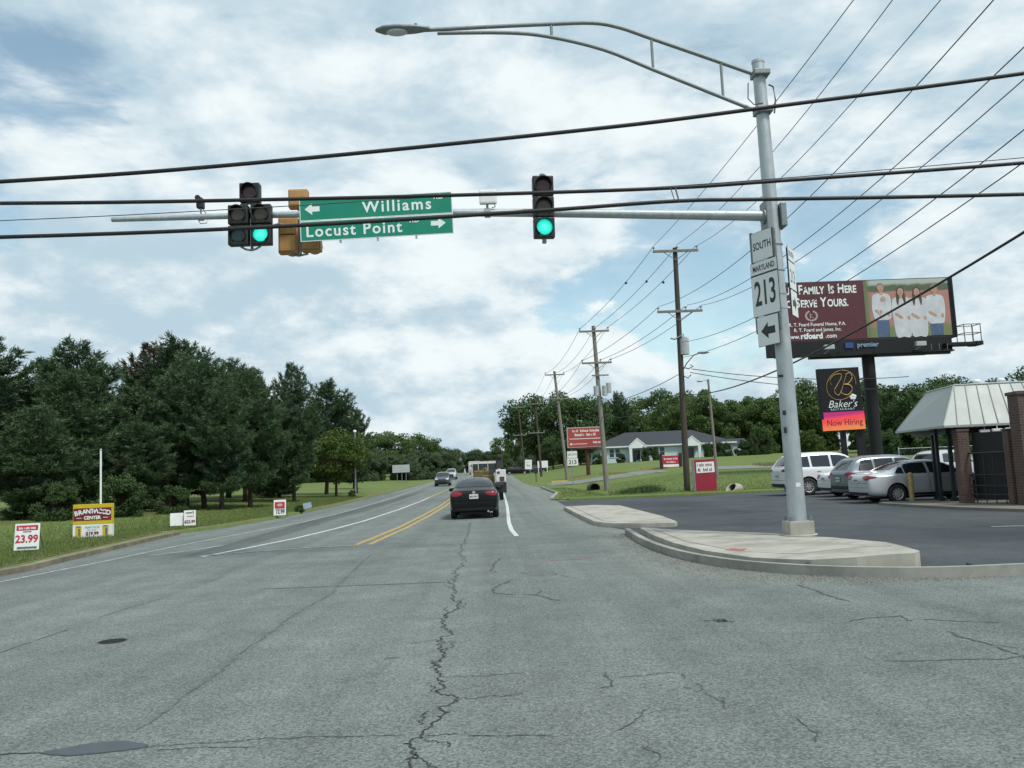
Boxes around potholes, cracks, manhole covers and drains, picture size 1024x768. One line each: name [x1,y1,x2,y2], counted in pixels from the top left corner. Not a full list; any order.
crack [594,671,727,710]
crack [0,528,523,768]
crack [490,558,573,600]
crack [848,615,1024,661]
crack [618,706,671,760]
